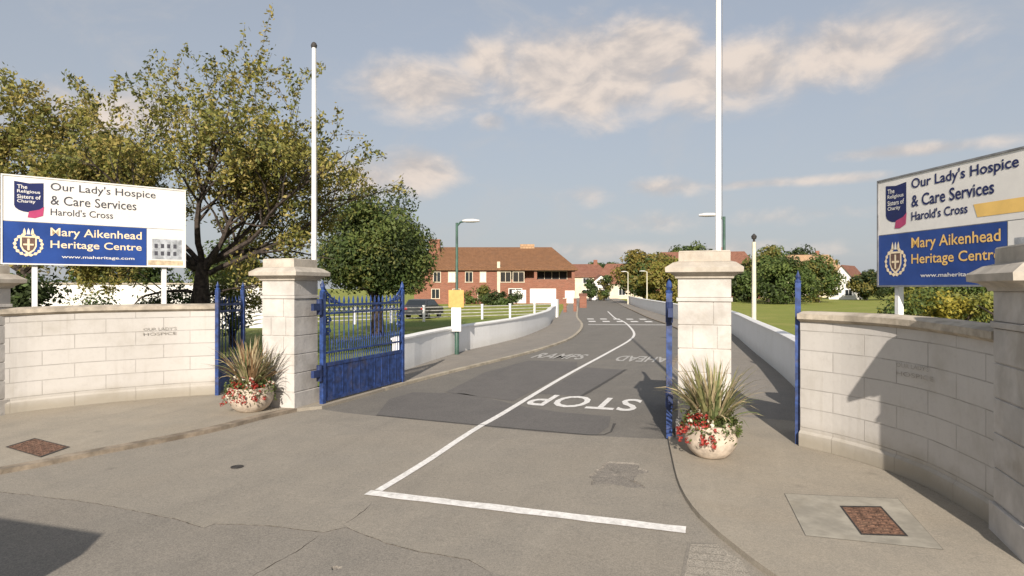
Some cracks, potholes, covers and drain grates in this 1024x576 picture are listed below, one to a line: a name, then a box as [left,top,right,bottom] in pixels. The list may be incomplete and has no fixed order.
manhole cover [784,493,944,550]
manhole cover [6,438,69,457]
